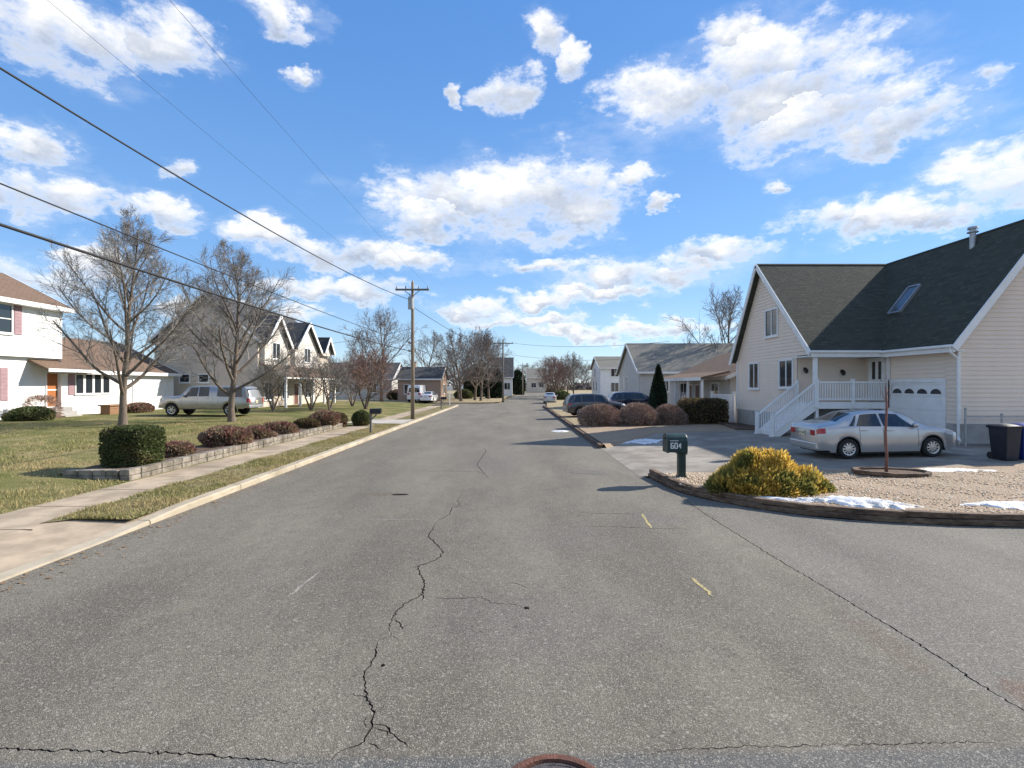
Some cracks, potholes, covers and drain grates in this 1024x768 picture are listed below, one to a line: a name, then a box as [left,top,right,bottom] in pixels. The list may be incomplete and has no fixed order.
crack [0,501,527,764]
manhole cover [512,754,596,768]
